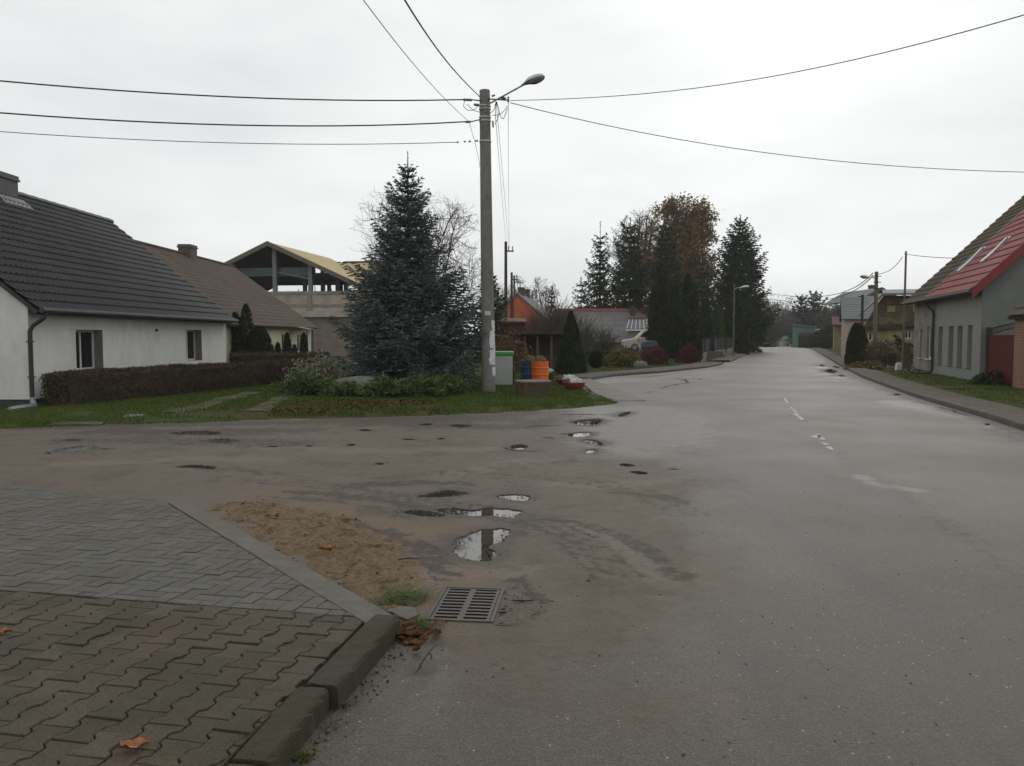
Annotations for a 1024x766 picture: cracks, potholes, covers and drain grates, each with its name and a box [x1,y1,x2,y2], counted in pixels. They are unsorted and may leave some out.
pothole [419,490,467,498]
pothole [451,527,512,561]
pothole [434,507,523,518]
crack [414,645,436,674]
drain grate [425,586,505,623]
